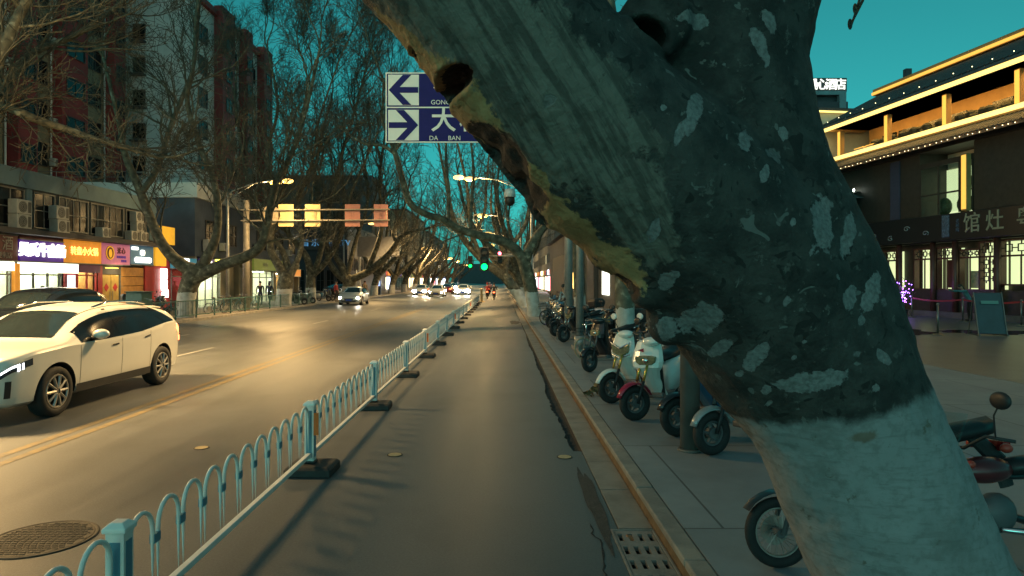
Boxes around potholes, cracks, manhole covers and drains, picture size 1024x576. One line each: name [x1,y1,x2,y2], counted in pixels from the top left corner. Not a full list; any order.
crack [590,524,608,576]
manhole cover [0,520,100,560]
drain grate [610,529,682,576]
